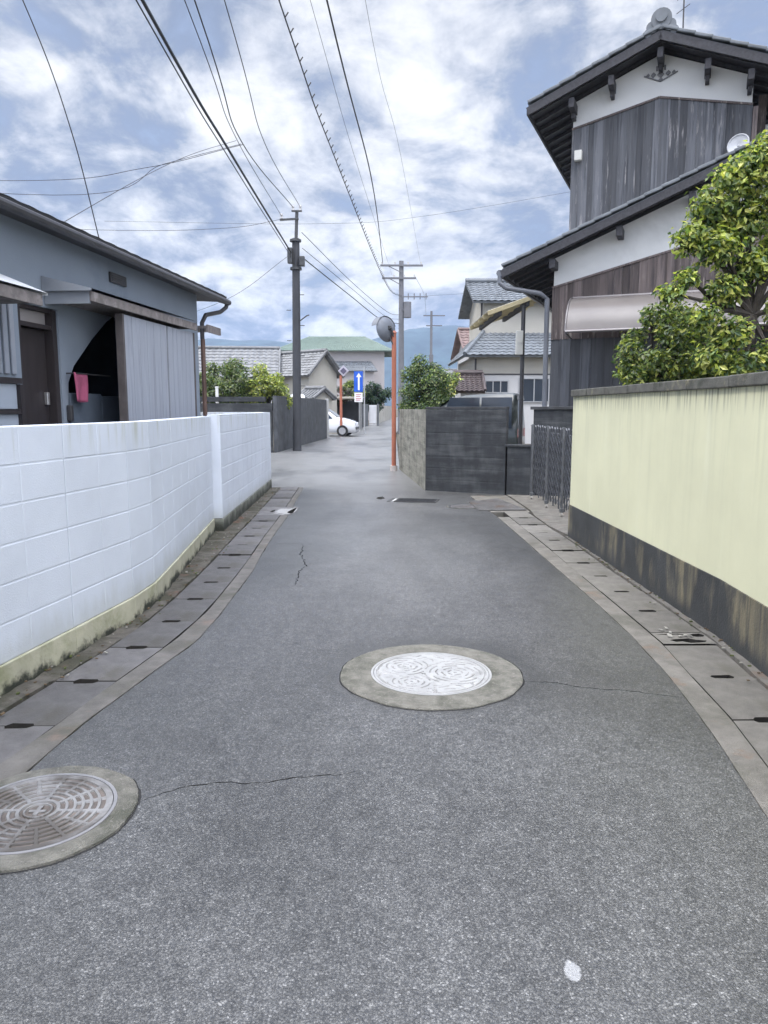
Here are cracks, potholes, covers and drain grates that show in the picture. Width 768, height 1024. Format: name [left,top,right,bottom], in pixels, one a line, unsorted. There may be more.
manhole cover [0,766,141,875]
manhole cover [339,644,525,711]
crack [147,770,362,799]
crack [530,681,674,697]
